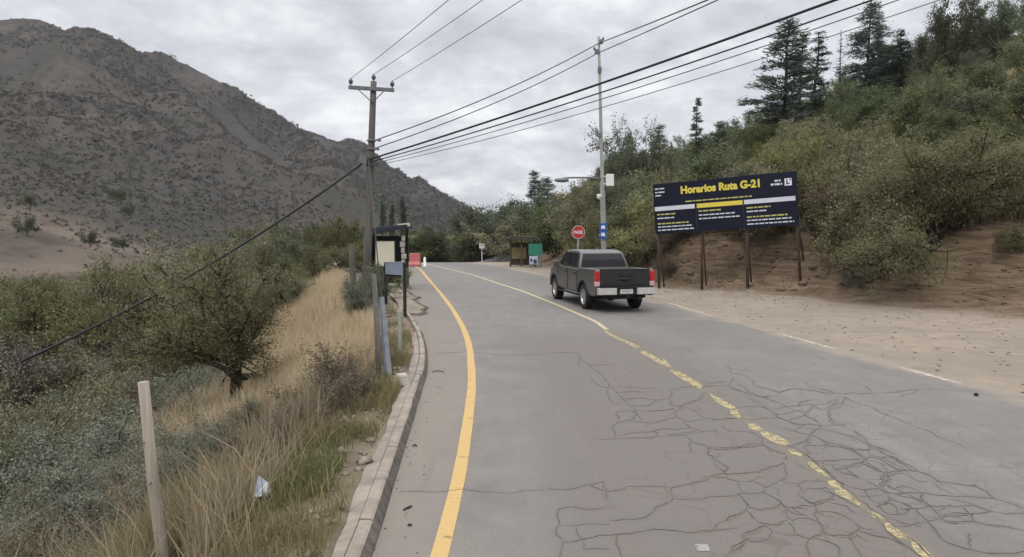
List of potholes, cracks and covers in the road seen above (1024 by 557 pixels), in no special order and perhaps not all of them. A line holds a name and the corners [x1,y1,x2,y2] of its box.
crack [553,363,1024,557]
